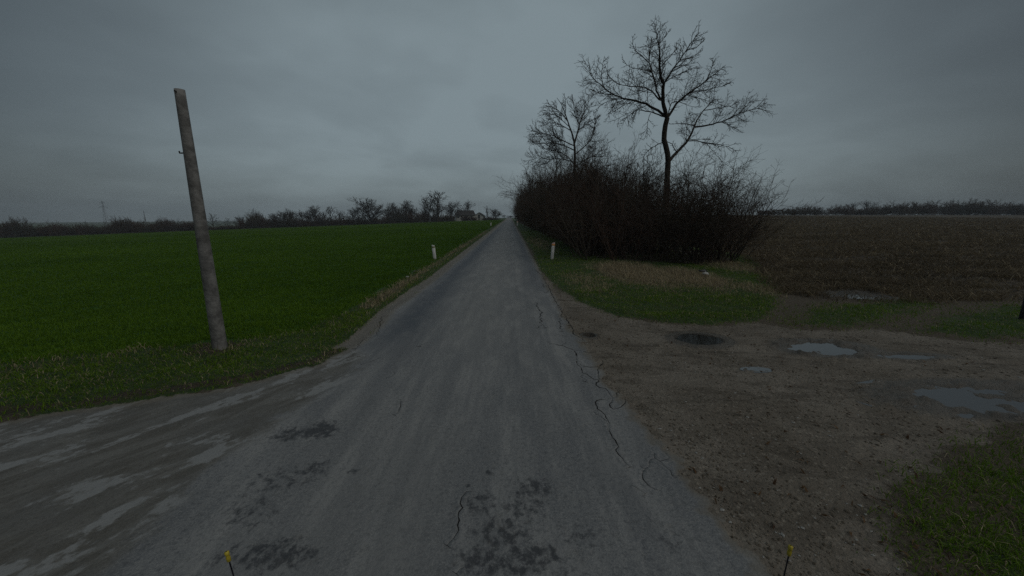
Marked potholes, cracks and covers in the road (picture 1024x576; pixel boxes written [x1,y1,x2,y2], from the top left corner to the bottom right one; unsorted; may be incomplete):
crack [533,269,684,497]
crack [442,488,472,576]
pothole [665,331,734,349]
crack [391,399,405,416]
